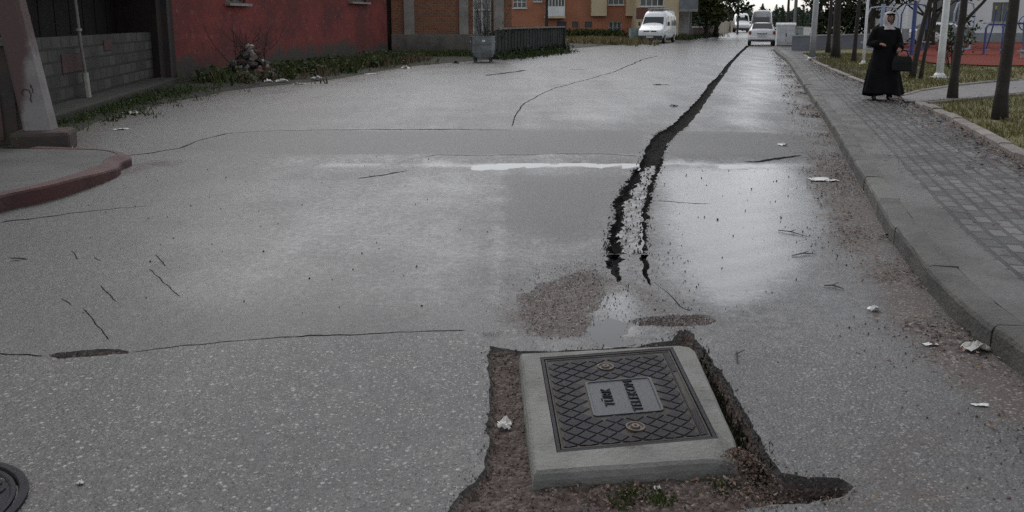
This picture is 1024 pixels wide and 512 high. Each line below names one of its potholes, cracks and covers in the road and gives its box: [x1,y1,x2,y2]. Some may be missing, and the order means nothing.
crack [62,251,179,340]
manhole cover [0,462,29,512]
crack [128,129,470,156]
crack [425,46,802,311]
manhole cover [519,346,738,491]
pothole [448,330,853,512]
